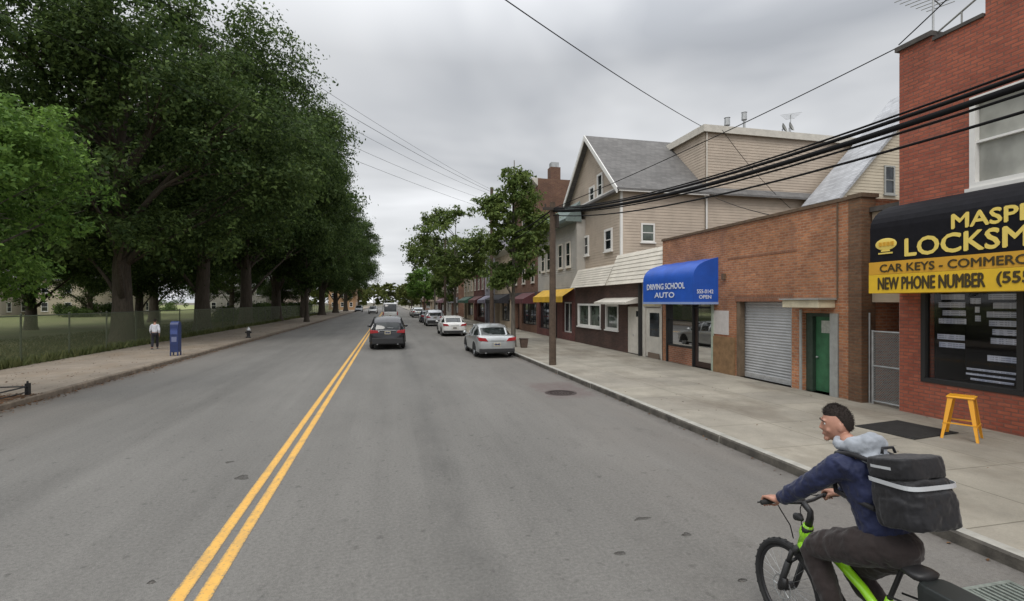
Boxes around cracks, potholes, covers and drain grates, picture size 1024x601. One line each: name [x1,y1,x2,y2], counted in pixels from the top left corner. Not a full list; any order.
drain grate [962,580,1024,601]
